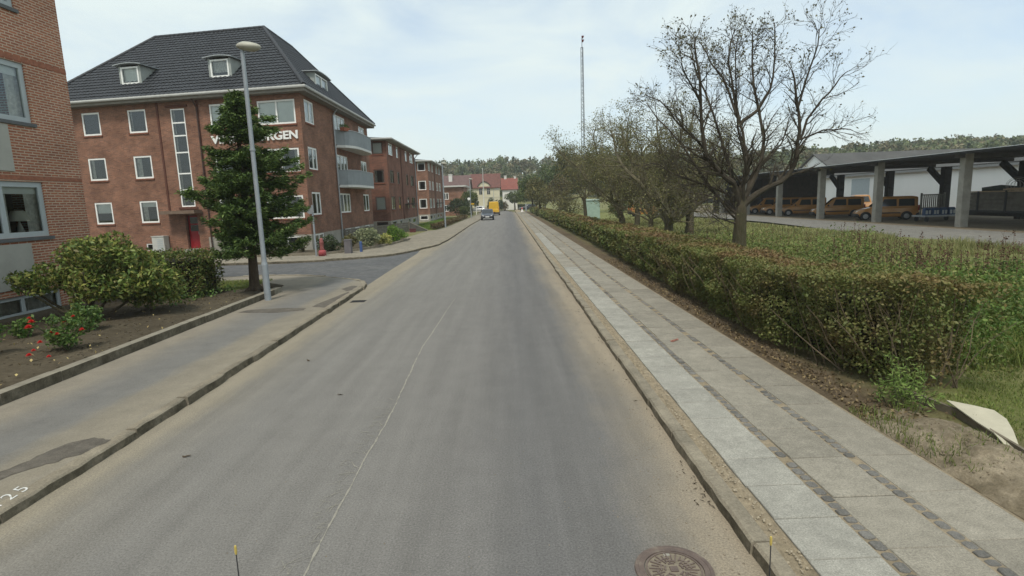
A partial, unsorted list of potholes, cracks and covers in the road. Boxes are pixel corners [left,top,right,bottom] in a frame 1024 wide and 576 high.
manhole cover [634,546,715,576]
